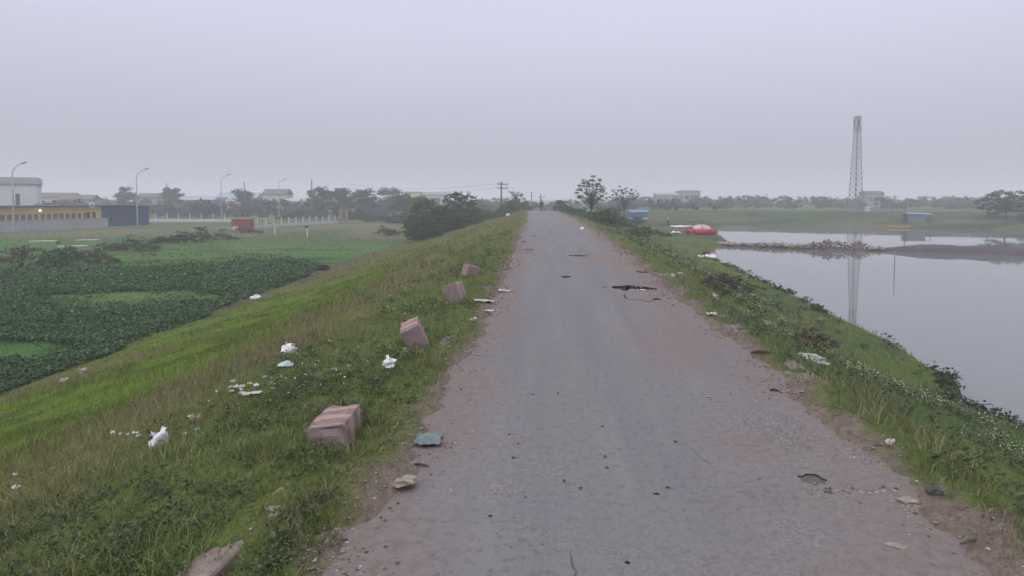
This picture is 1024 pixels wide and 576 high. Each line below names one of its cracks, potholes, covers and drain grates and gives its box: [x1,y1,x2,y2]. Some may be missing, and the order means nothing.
pothole [783,468,842,492]
